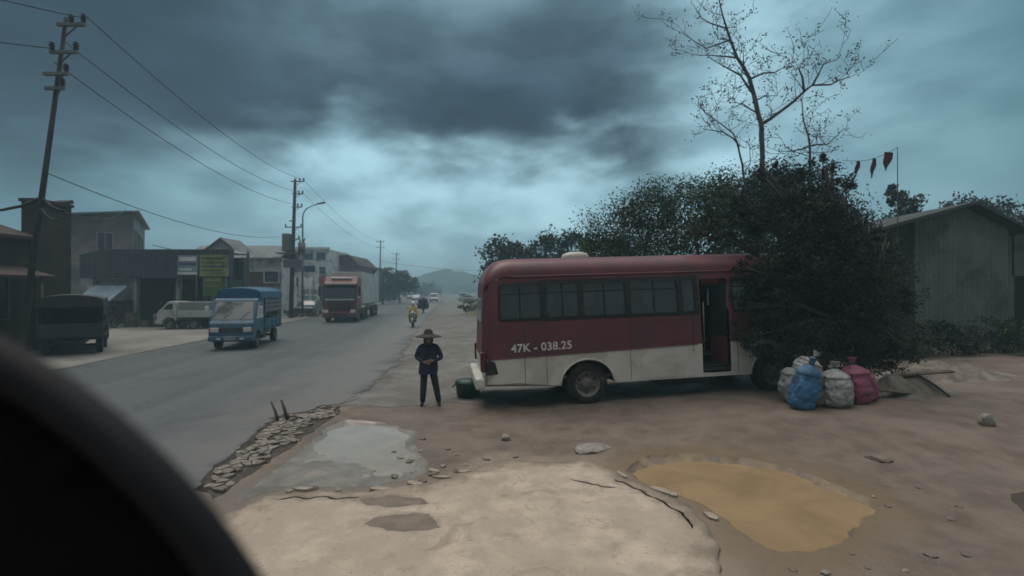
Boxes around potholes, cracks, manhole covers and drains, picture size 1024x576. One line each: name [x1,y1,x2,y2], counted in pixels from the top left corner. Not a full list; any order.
pothole [234,420,429,505]
pothole [625,453,880,553]
crack [570,479,691,525]
